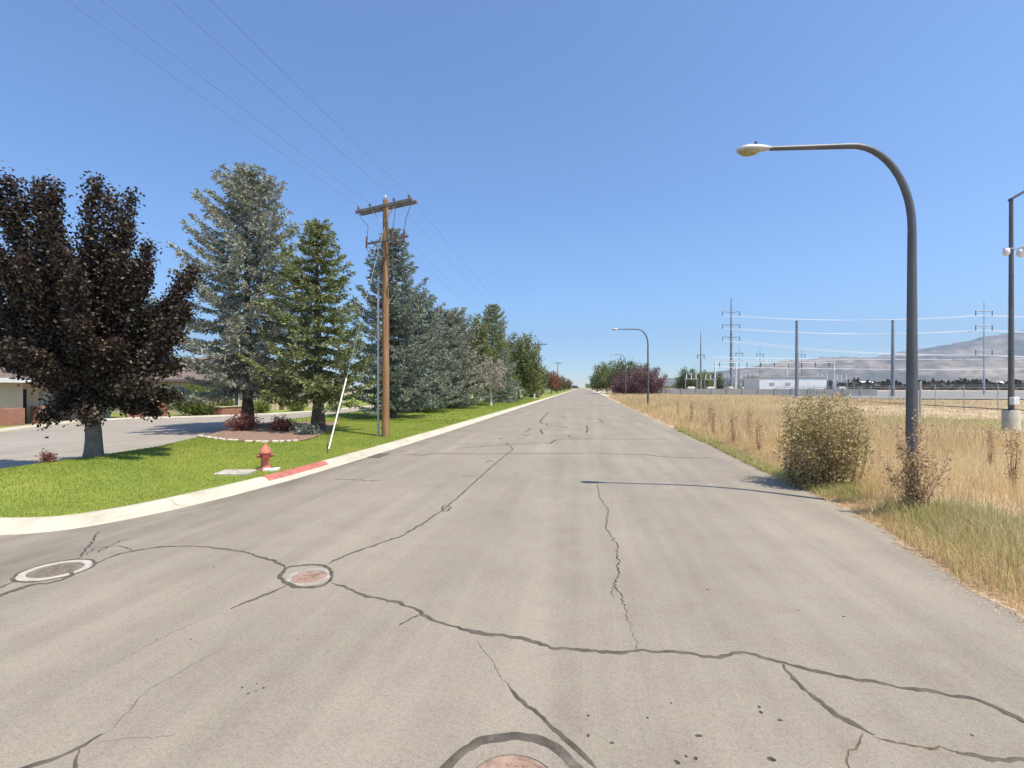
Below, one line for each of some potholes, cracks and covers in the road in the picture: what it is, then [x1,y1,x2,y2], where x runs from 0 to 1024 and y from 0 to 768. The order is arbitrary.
crack [405,412,682,463]
crack [79,531,131,558]
manhole cover [277,564,334,589]
crack [107,610,227,668]
crack [93,649,221,745]
crack [596,478,639,649]
crack [845,733,957,768]
manhole cover [10,558,98,583]
manhole cover [440,732,583,768]
